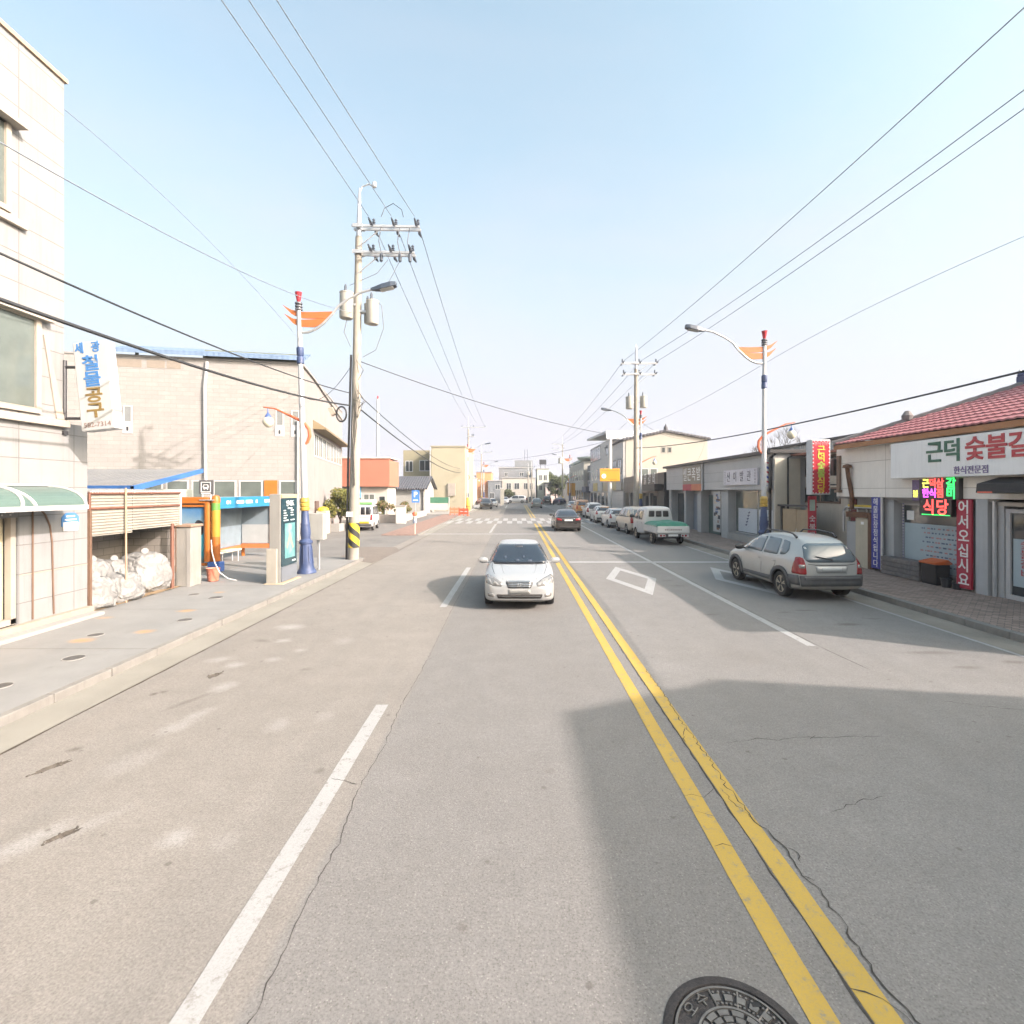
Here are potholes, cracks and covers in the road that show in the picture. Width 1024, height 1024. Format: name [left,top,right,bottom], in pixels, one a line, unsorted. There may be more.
crack [647,672,921,1024]
crack [247,541,489,1024]
manhole cover [663,976,798,1024]
